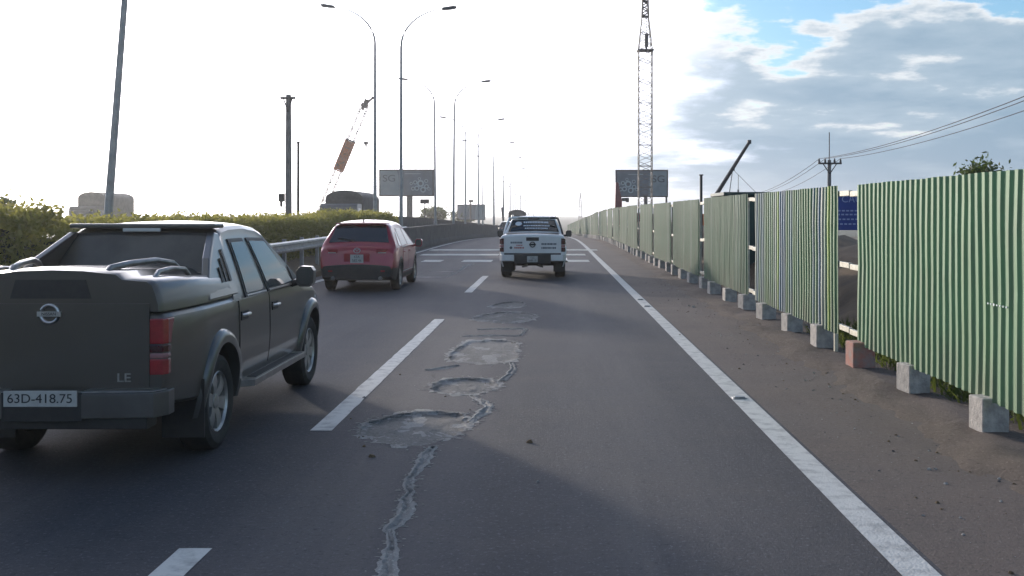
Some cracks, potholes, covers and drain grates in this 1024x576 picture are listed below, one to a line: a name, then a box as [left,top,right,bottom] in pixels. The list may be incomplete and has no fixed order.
crack [372,446,441,576]
pothole [417,370,507,397]
crack [461,328,527,337]
crack [468,362,518,422]
pothole [345,407,499,450]
pothole [438,338,526,365]
pothole [486,300,530,308]
pothole [468,311,539,324]
